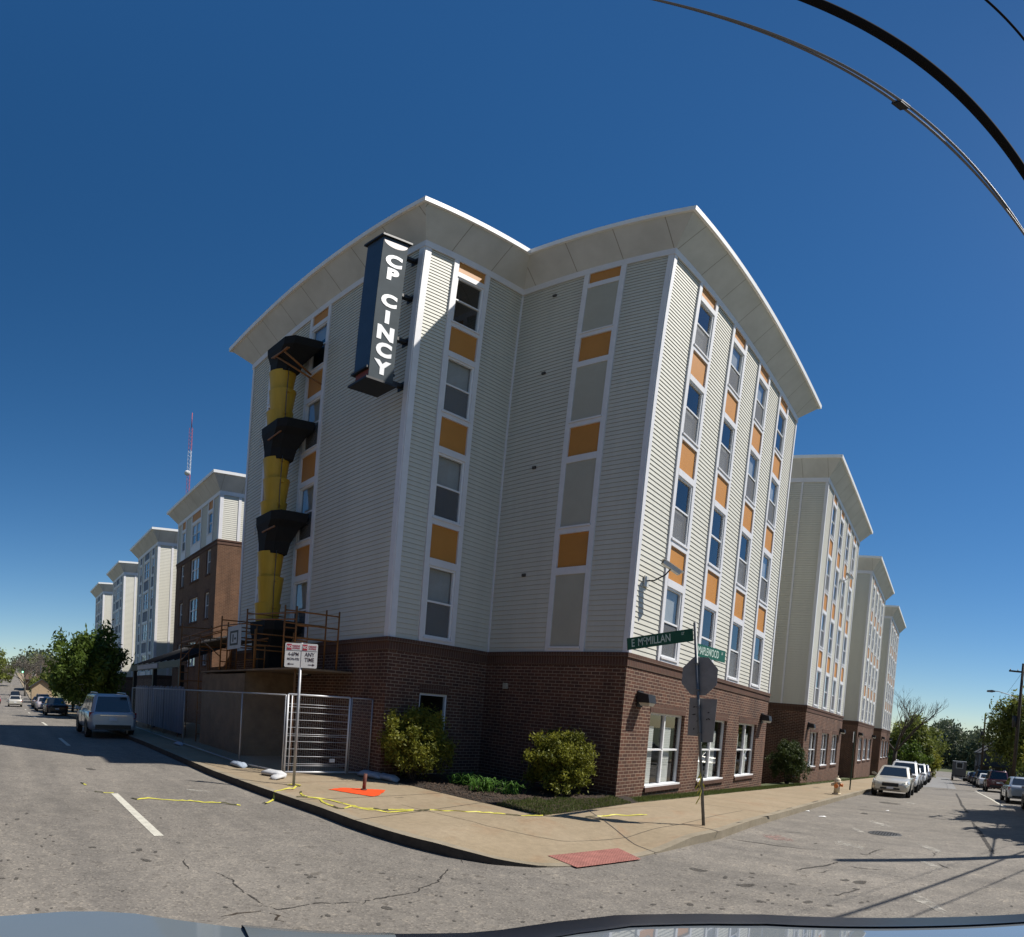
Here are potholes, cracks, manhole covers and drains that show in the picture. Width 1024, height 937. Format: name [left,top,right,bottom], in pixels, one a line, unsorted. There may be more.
crack [216,860,463,921]
crack [798,849,898,877]
